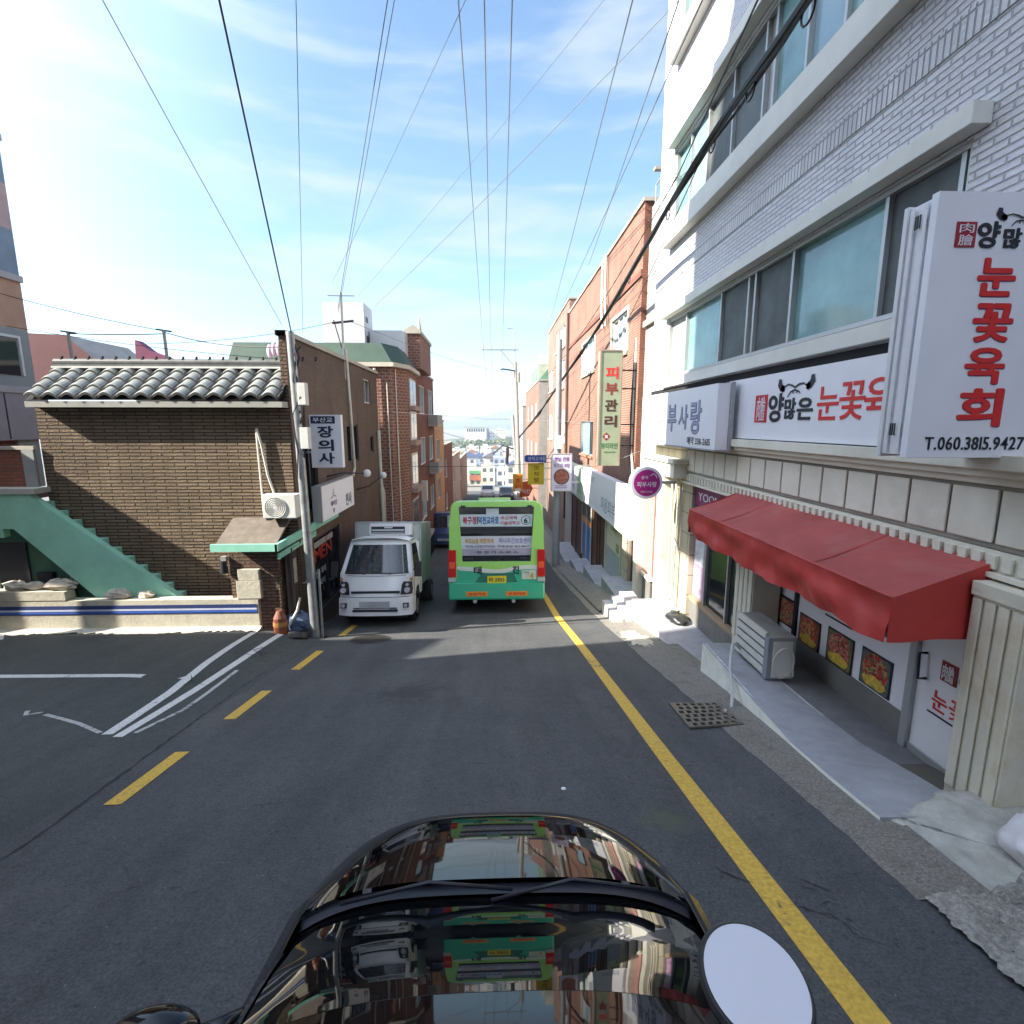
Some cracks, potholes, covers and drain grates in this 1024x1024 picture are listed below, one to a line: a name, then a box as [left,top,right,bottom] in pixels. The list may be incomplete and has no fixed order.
drain grate [669,702,744,729]
crack [789,880,875,942]
